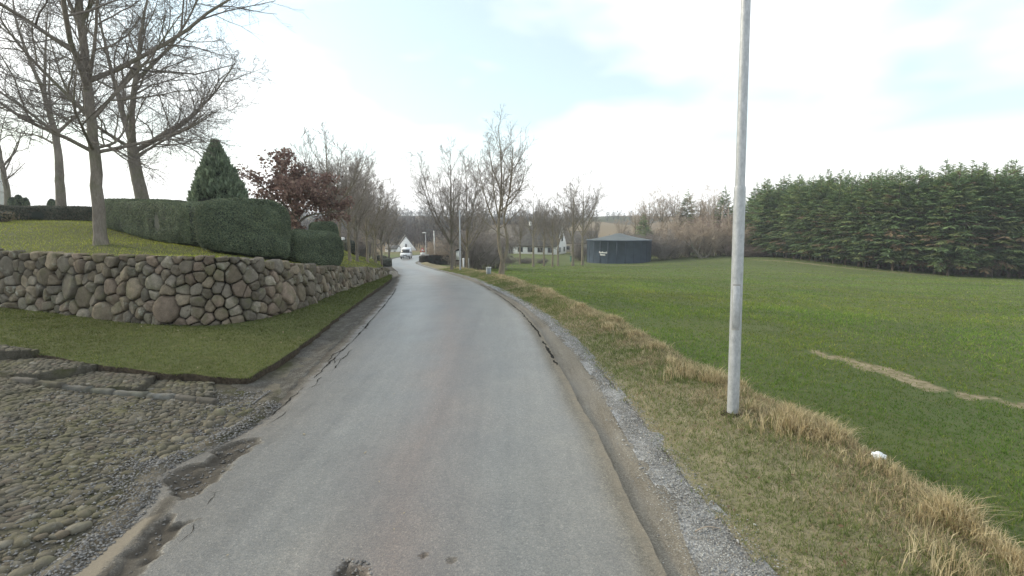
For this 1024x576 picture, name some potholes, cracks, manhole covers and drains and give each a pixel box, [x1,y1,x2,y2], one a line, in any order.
pothole [105,513,204,576]
crack [482,285,558,364]
crack [272,289,396,420]
pothole [159,437,264,501]
pothole [330,558,373,576]
